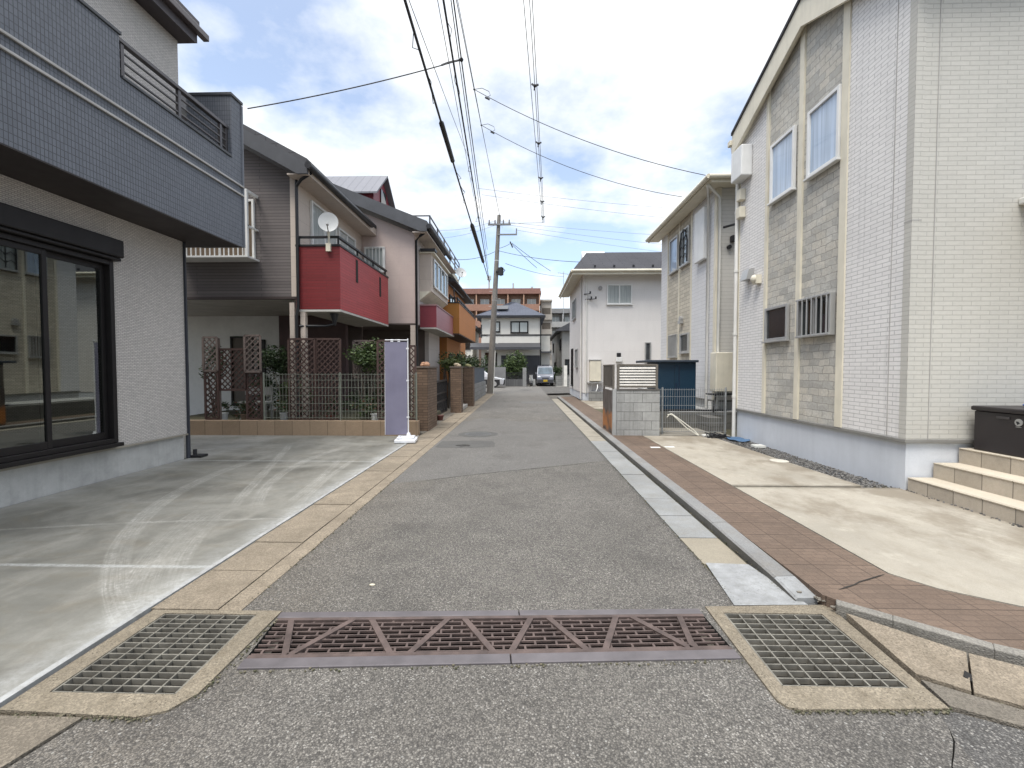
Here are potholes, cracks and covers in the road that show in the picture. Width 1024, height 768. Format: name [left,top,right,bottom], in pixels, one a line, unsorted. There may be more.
drain grate [705,605,950,712]
drain grate [0,610,282,720]
